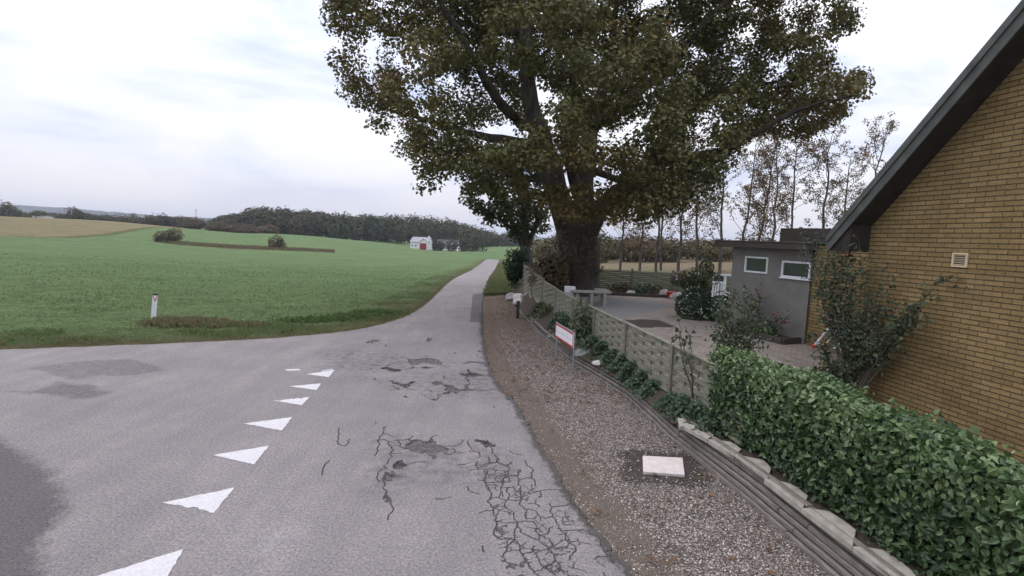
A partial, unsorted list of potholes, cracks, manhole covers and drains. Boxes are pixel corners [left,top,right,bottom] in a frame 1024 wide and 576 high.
crack [321,429,350,476]
pothole [404,439,449,459]
pothole [443,384,477,395]
pothole [381,471,402,483]
crack [374,422,620,576]
